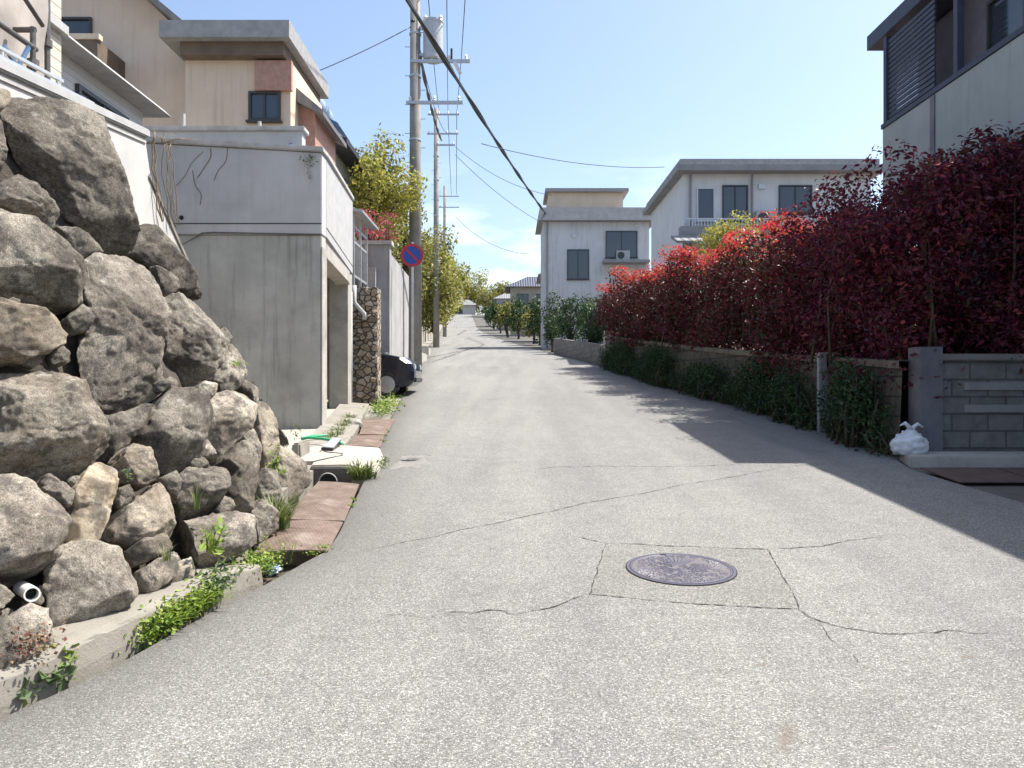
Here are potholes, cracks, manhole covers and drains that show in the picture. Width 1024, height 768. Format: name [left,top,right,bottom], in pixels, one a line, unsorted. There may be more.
crack [799,609,1003,664]
manhole cover [626,553,738,586]
crack [344,464,766,556]
crack [396,594,587,619]
